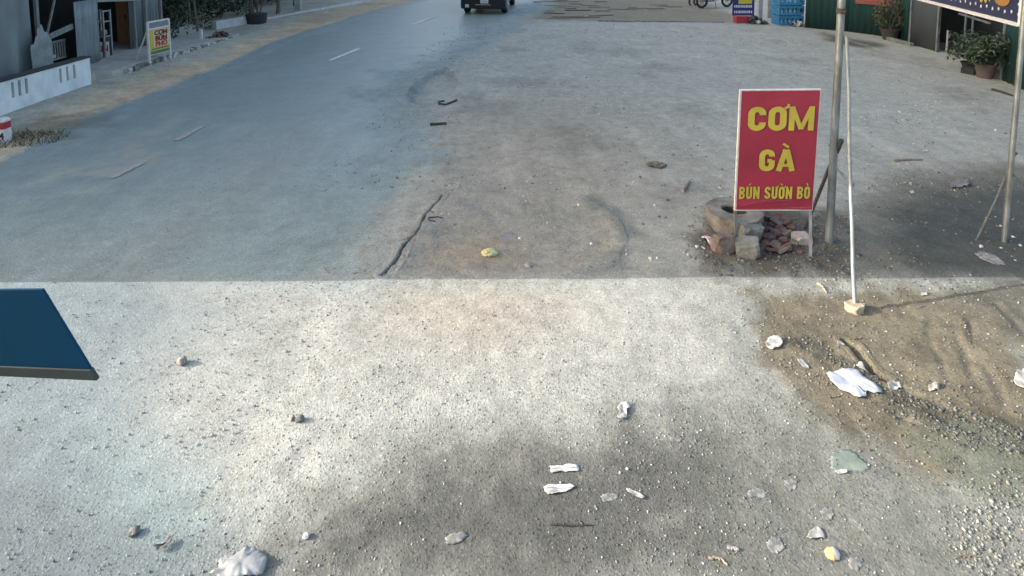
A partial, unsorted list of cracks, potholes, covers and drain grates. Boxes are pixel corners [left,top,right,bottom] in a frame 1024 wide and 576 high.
crack [373,191,449,281]
